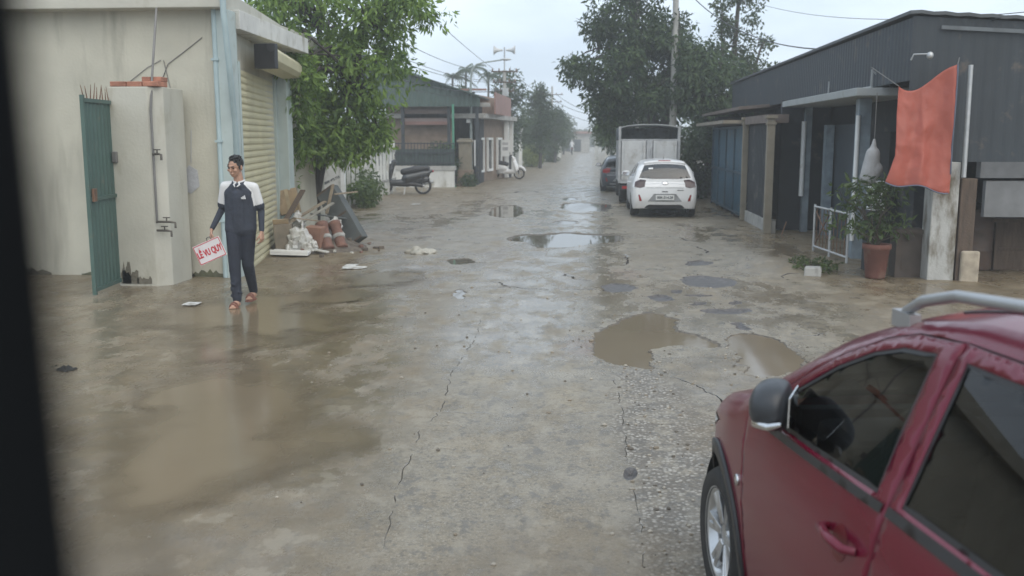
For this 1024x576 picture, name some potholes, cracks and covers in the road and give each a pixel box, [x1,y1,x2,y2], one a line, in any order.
crack [383,321,595,549]
pothole [506,232,625,248]
pothole [724,333,806,378]
pothole [487,205,524,218]
pothole [591,311,722,370]
pothole [560,203,614,211]
crack [611,370,627,461]
